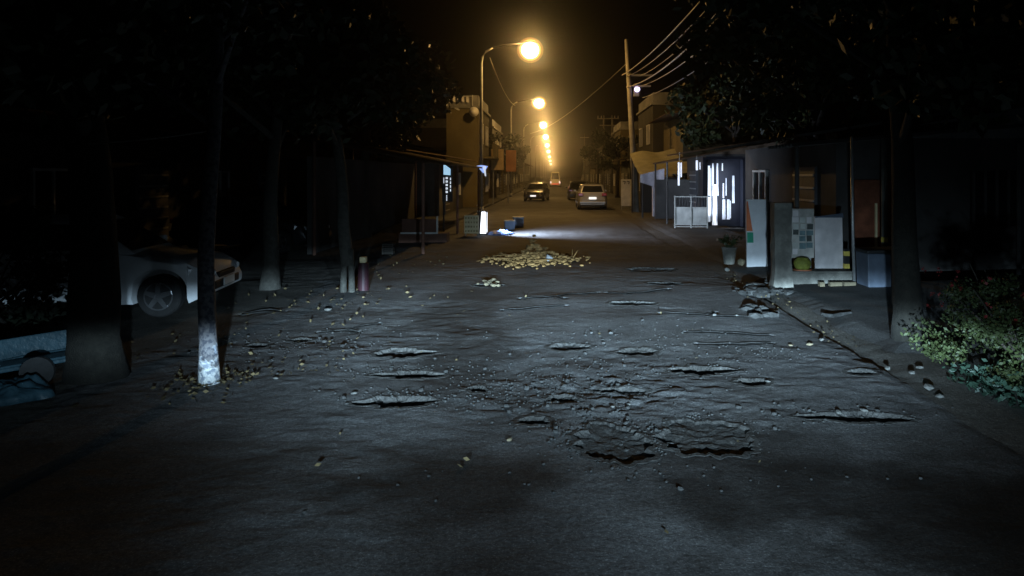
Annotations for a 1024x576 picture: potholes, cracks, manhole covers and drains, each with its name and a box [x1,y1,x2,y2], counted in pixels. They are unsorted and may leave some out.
pothole [841,368,884,377]
pothole [363,369,450,380]
pothole [369,347,444,361]
pothole [610,346,663,357]
pothole [543,341,595,352]
pothole [565,420,662,468]
pothole [345,394,445,410]
pothole [662,364,744,377]
pothole [787,409,922,425]
pothole [639,417,763,460]
pothole [727,377,776,388]
pothole [510,414,556,427]
